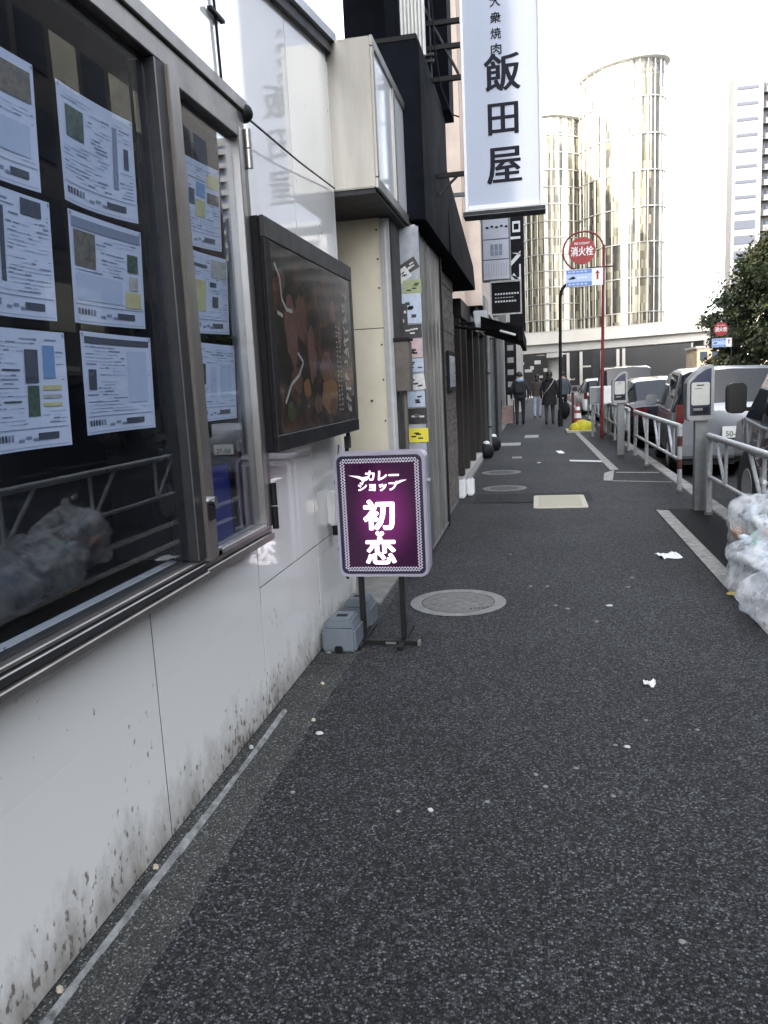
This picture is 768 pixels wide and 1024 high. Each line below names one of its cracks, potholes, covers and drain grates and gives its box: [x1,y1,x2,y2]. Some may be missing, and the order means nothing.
manhole cover [534,495,588,509]
manhole cover [411,589,506,616]
